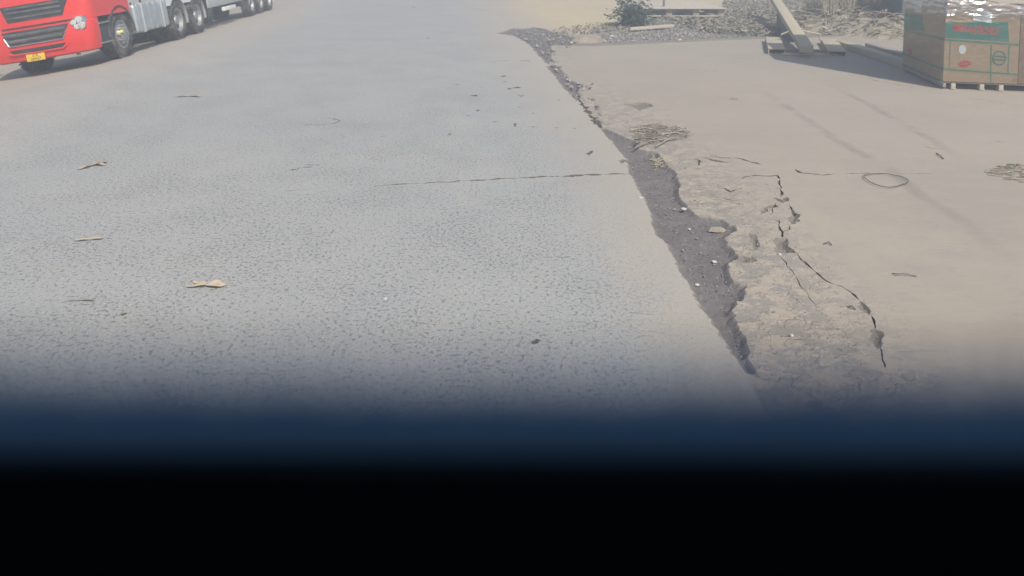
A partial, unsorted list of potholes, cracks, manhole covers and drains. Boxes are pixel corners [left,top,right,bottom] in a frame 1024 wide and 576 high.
crack [695,155,832,237]
pothole [546,65,584,101]
crack [777,254,876,328]
pothole [749,234,760,250]
pothole [600,128,750,374]
crack [381,173,622,186]
